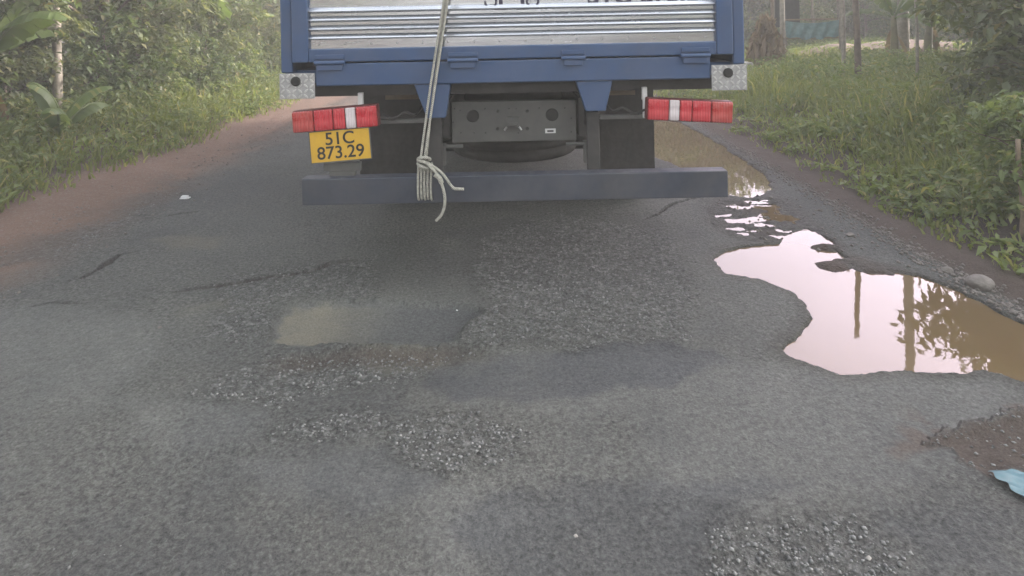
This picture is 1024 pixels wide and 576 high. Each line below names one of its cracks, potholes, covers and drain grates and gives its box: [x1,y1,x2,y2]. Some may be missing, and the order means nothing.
crack [175,260,347,293]
pothole [711,228,1024,354]
pothole [921,406,1024,479]
crack [650,198,695,218]
pothole [265,297,485,350]
crack [80,252,132,279]
pothole [656,120,775,198]
